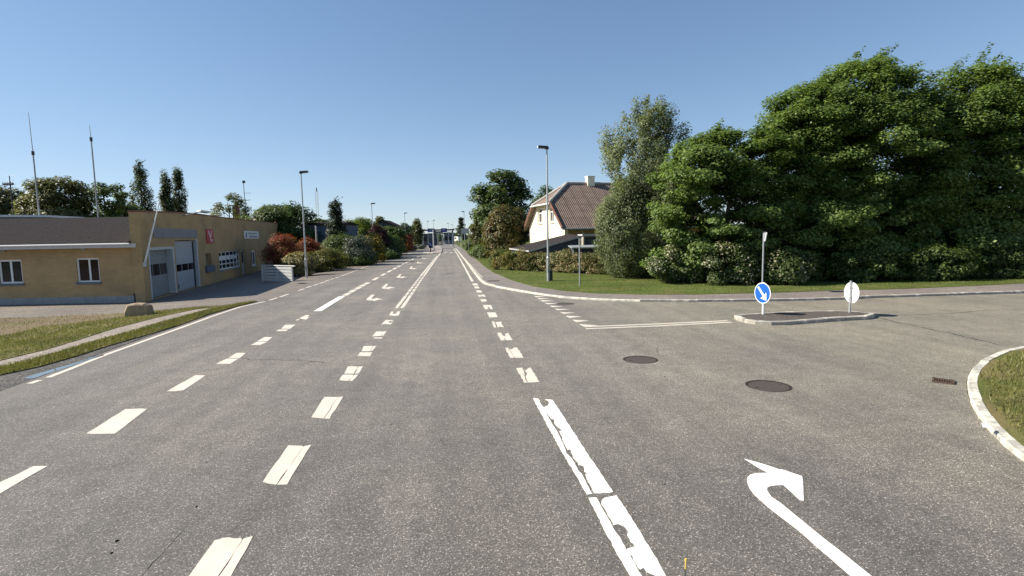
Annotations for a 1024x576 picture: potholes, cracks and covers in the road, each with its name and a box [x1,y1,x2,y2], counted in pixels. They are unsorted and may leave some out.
drain grate [932,377,955,385]
crack [882,318,1008,347]
manhole cover [745,380,793,392]
manhole cover [623,356,658,364]
